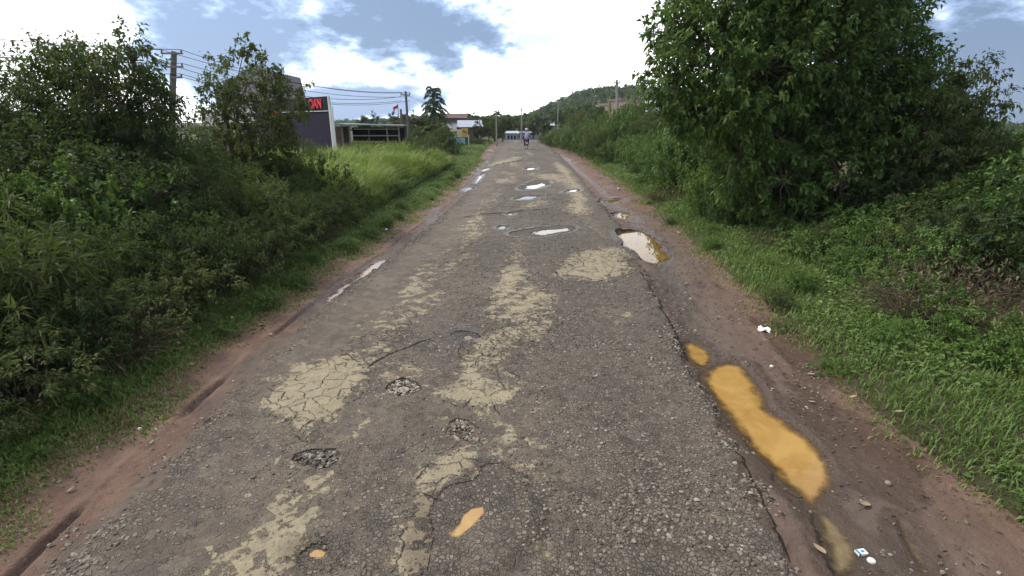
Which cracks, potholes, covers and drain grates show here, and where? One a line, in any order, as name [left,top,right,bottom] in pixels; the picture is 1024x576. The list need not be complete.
pothole [508,225,576,237]
pothole [518,180,551,190]
pothole [445,418,479,441]
crack [741,455,791,563]
pothole [615,228,673,265]
pothole [385,377,422,397]
crack [263,310,432,444]
pothole [291,448,341,470]
